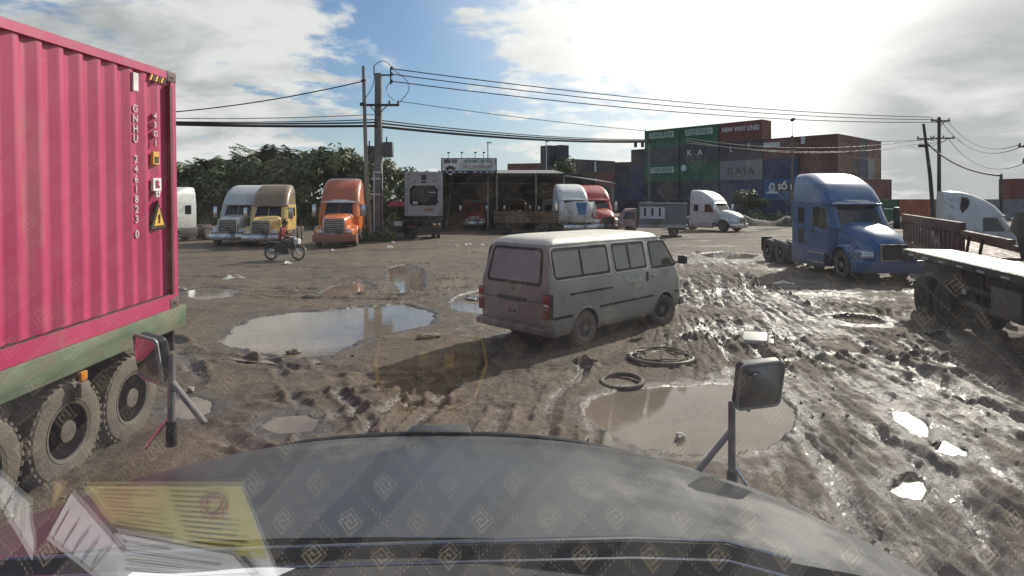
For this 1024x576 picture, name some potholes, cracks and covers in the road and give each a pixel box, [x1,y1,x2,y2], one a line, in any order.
pothole [832,315,882,325]
